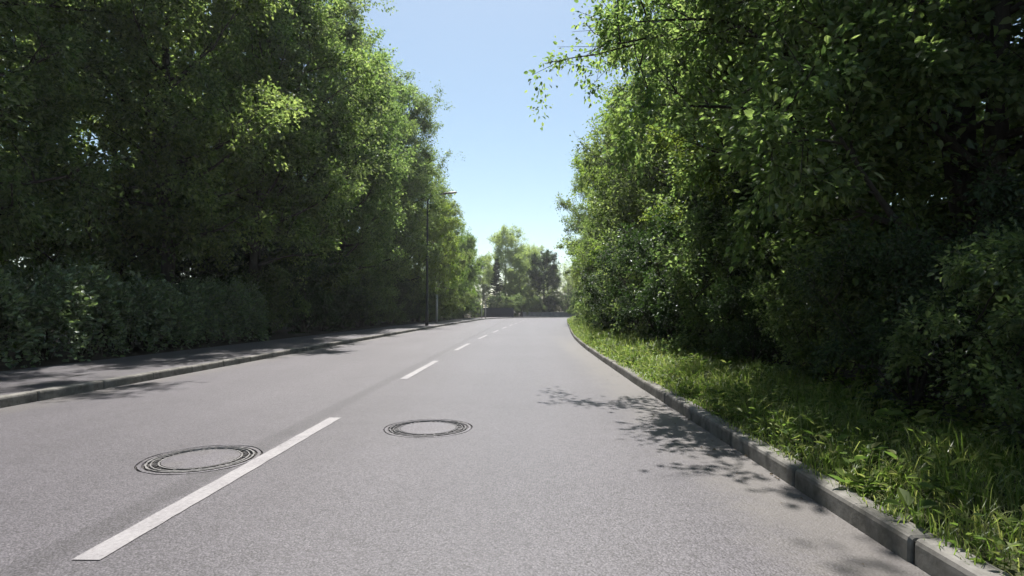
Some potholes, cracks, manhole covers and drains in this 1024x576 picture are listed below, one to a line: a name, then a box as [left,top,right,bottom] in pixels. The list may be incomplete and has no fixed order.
manhole cover [135,445,263,475]
manhole cover [384,419,472,438]
